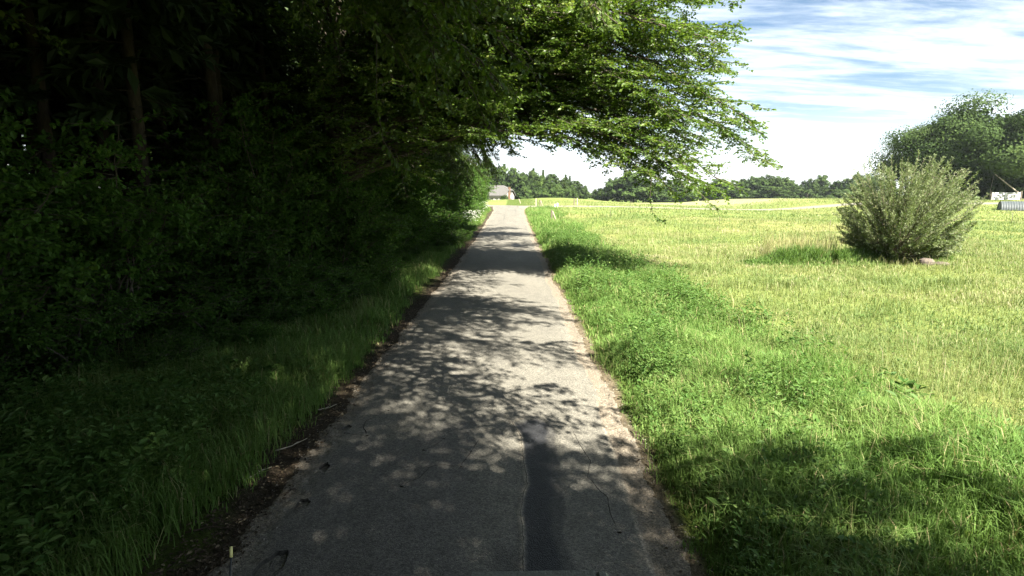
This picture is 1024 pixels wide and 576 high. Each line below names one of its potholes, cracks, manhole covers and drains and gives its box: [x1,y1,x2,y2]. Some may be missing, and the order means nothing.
crack [567,424,622,532]
pothole [288,496,316,513]
pothole [314,460,335,475]
pothole [244,546,294,576]
